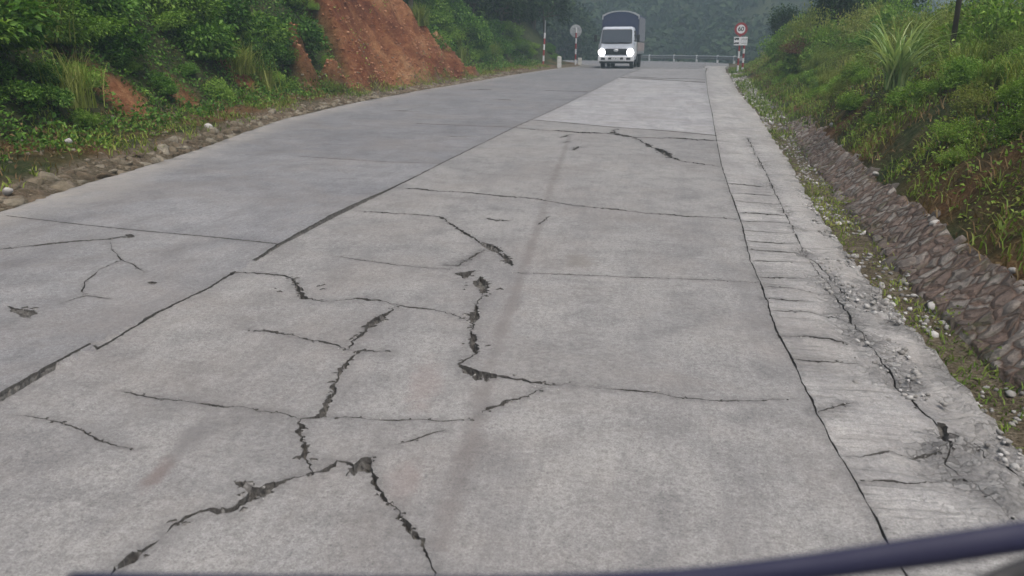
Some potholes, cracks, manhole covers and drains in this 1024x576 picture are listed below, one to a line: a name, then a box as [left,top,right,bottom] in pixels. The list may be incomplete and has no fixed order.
crack [4,234,143,301]
crack [516,127,716,165]
crack [111,272,571,576]
pothole [7,306,39,318]
crack [397,138,1018,520]
